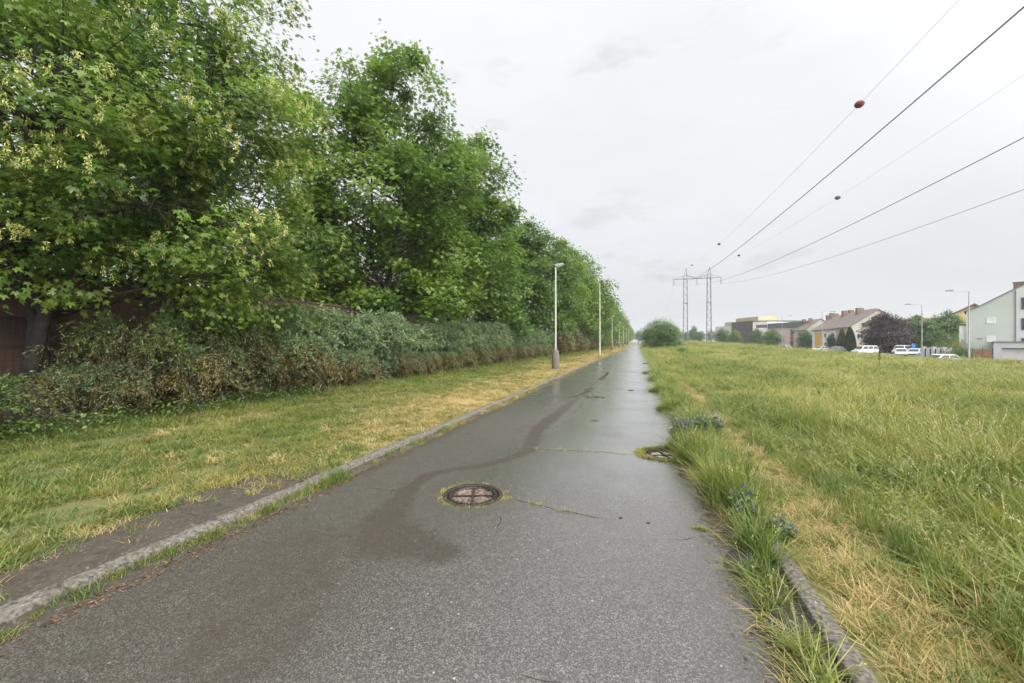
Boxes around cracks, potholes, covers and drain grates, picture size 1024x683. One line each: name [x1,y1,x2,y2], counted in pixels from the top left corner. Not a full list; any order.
manhole cover [633,444,682,464]
manhole cover [431,481,510,511]
crack [498,497,608,526]
crack [537,447,635,455]
